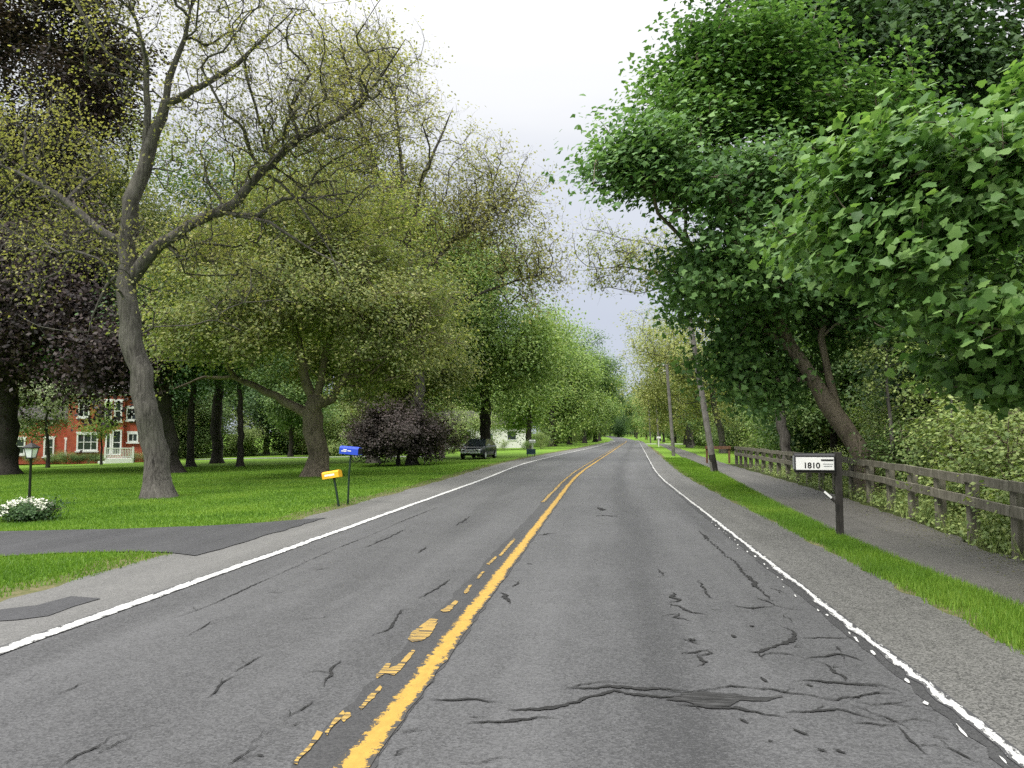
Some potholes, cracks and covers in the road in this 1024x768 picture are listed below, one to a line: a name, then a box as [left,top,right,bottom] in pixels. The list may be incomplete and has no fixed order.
crack [374,579,450,634]
crack [65,716,175,763]
crack [228,660,341,764]
crack [429,588,980,763]
crack [209,654,265,696]
crack [658,569,714,621]
